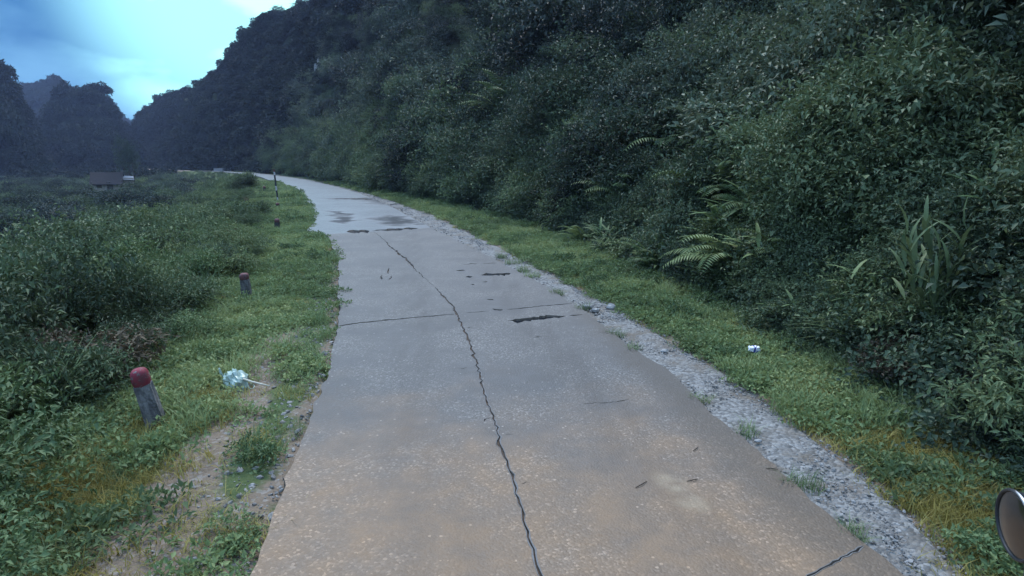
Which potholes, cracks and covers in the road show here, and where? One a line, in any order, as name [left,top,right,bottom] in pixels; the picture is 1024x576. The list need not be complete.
pothole [509,315,564,323]
crack [338,233,570,576]
